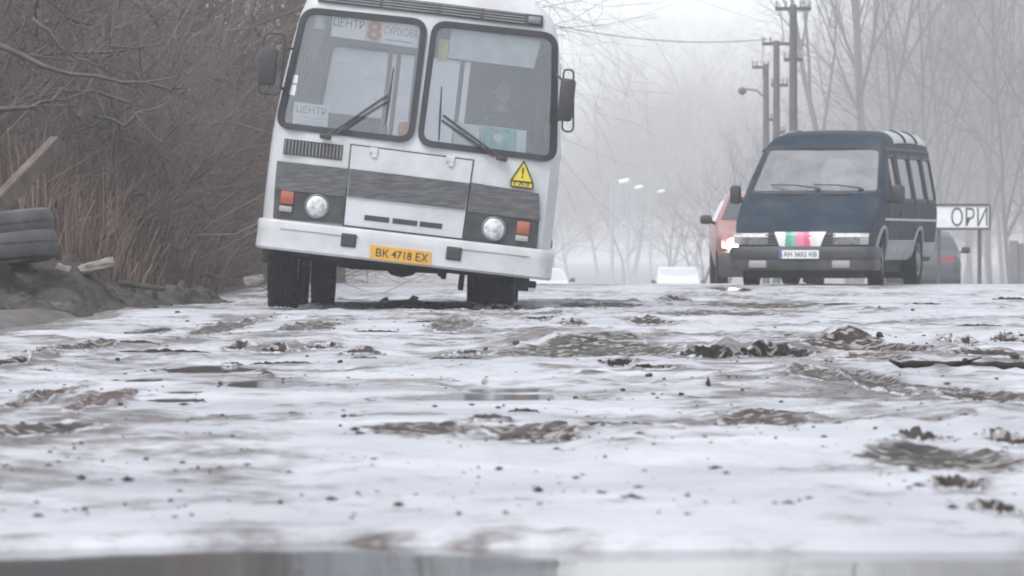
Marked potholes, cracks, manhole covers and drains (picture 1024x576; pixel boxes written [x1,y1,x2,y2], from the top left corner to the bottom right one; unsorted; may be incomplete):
pothole [249,342,302,354]
pothole [469,414,514,422]
pothole [342,345,383,355]
pothole [677,342,743,359]
pothole [224,341,249,351]
pothole [971,498,1023,516]
pothole [300,339,344,350]
pothole [923,474,986,492]
pothole [888,426,953,442]
pothole [984,427,1024,446]
pothole [0,350,32,366]
pothole [741,338,822,357]
